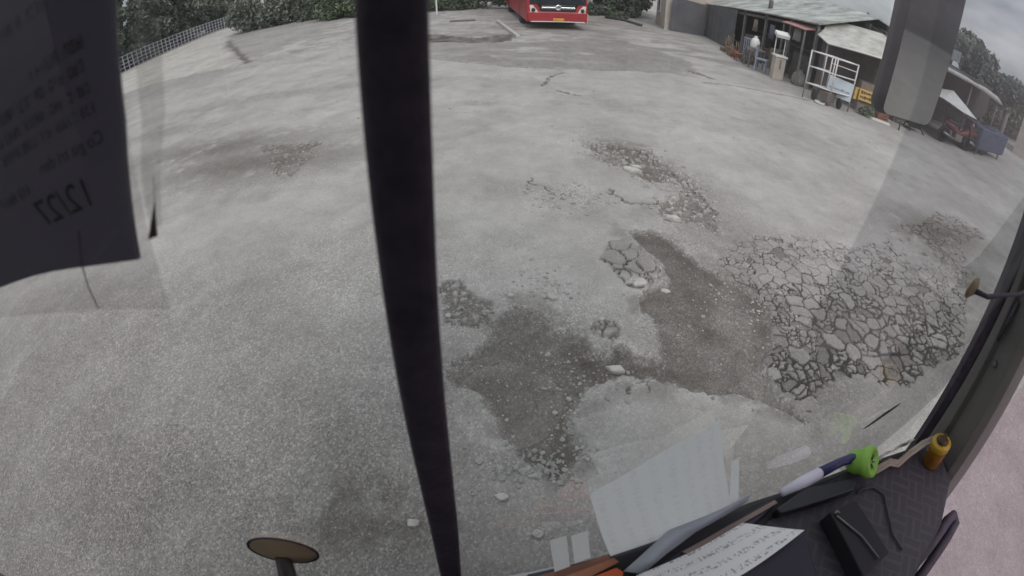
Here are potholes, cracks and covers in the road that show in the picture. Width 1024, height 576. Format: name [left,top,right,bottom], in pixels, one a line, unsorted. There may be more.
pothole [582,140,720,234]
pothole [443,228,812,482]
crack [607,188,659,205]
pothole [259,140,324,178]
crack [539,72,582,96]
crack [525,177,564,198]
